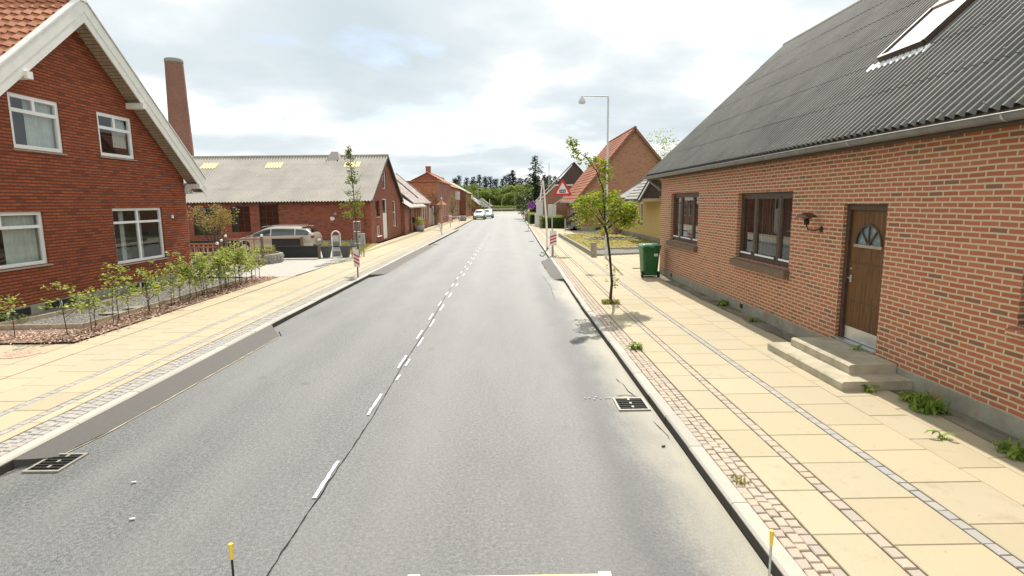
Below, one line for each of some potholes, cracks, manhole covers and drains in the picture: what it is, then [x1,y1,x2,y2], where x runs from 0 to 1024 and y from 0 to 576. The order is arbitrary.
drain grate [22,453,89,473]
drain grate [612,397,651,411]
